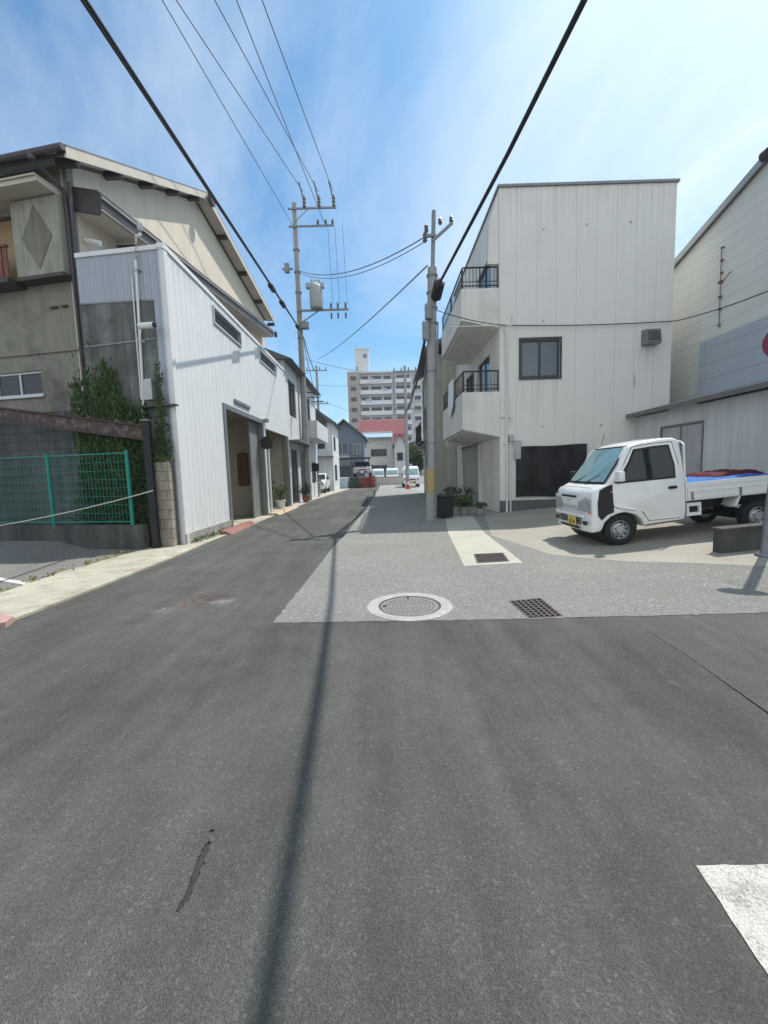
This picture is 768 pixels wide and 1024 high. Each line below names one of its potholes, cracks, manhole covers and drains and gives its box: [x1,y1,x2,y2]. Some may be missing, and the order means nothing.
drain grate [509,598,563,618]
manhole cover [367,593,453,622]
crack [175,829,215,913]
